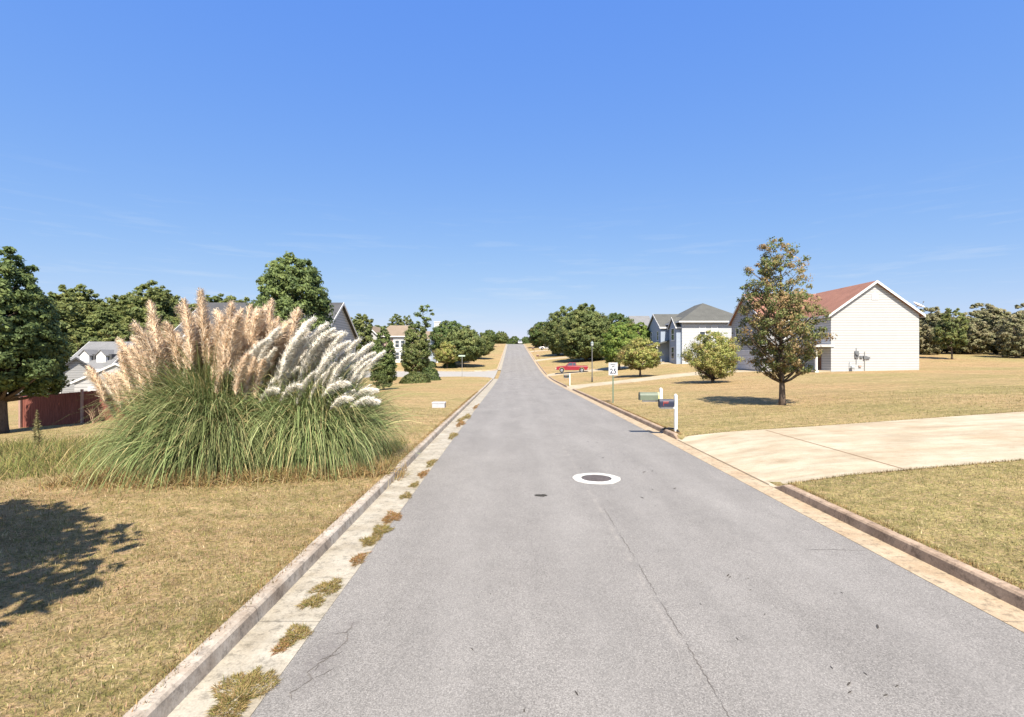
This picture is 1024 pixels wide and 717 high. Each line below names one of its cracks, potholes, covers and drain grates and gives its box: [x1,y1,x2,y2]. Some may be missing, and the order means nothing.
crack [607,513,729,717]
manhole cover [572,473,621,484]
crack [289,623,353,697]
